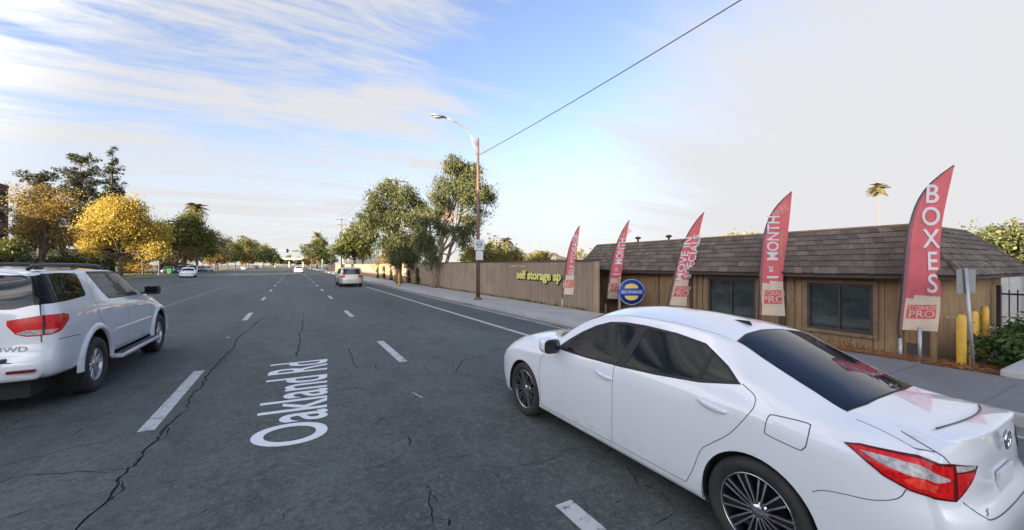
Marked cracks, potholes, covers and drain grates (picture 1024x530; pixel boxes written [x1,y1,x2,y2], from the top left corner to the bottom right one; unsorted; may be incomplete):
crack [0,318,263,530]
crack [418,454,472,527]
crack [616,464,674,526]
crack [354,395,426,470]
